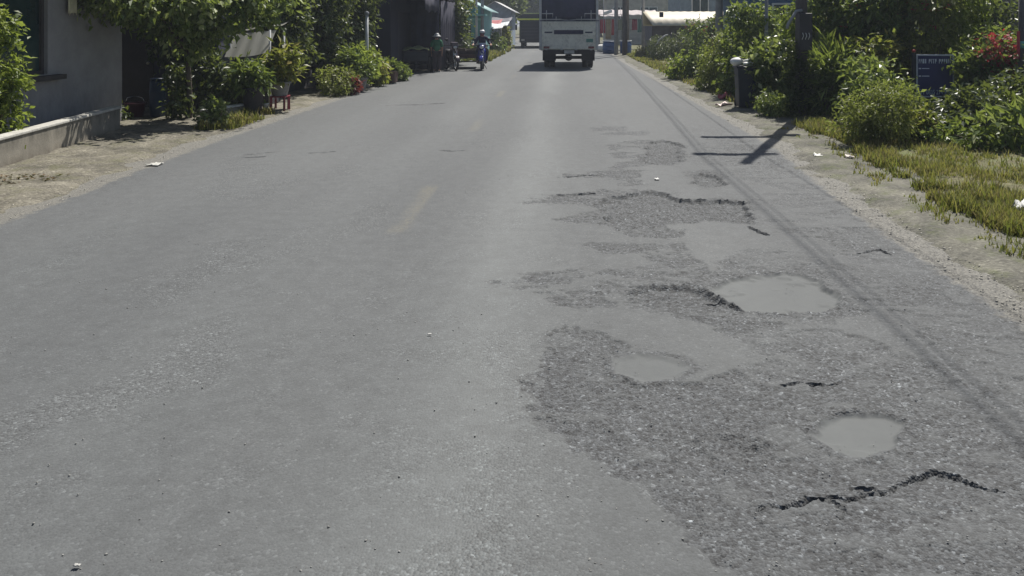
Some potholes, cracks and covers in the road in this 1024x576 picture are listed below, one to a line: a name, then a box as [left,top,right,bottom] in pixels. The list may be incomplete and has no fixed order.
pothole [805,409,909,459]
pothole [708,272,845,314]
crack [747,226,771,236]
pothole [640,139,686,165]
pothole [689,172,729,187]
crack [755,469,1007,520]
pothole [611,352,695,383]
pothole [597,189,756,230]
